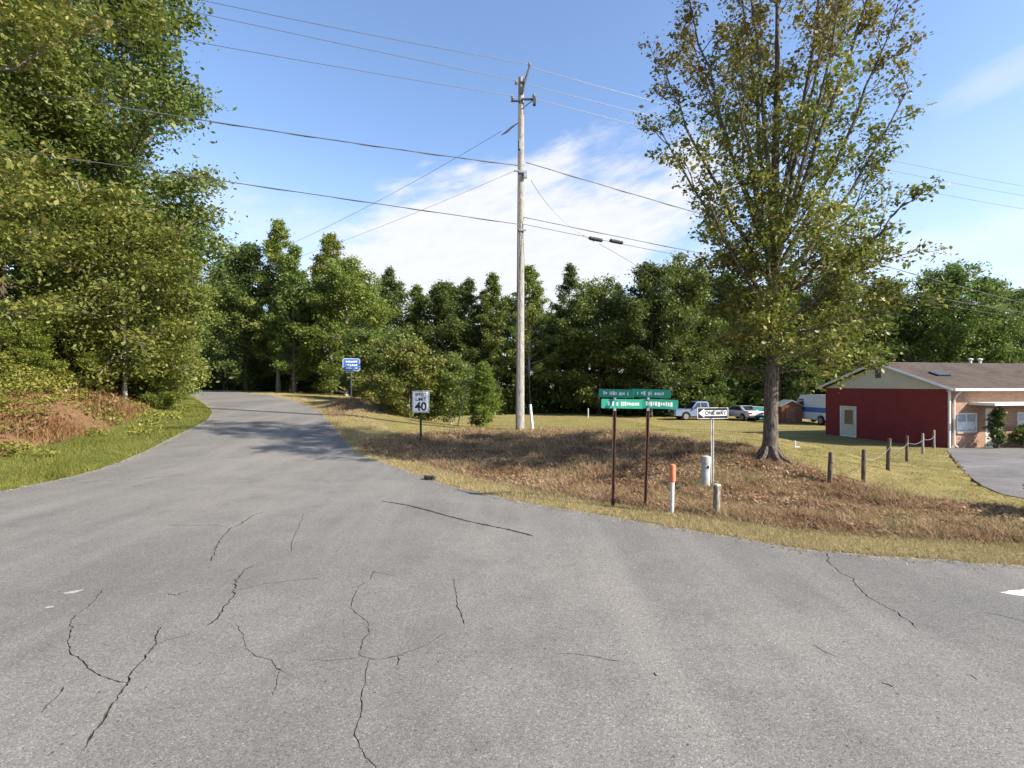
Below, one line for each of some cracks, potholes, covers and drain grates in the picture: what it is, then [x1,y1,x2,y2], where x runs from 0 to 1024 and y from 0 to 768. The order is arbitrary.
crack [305,571,443,767]
crack [41,512,315,750]
crack [826,554,917,629]
